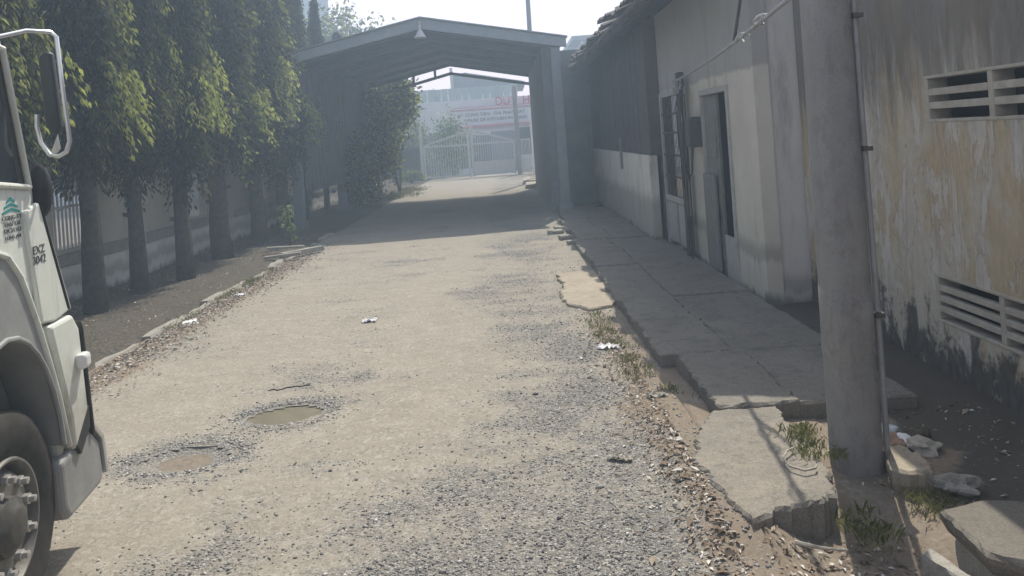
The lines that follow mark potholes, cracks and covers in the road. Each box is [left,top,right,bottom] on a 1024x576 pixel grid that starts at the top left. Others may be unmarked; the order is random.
pothole [201,391,366,437]
pothole [98,429,284,492]
